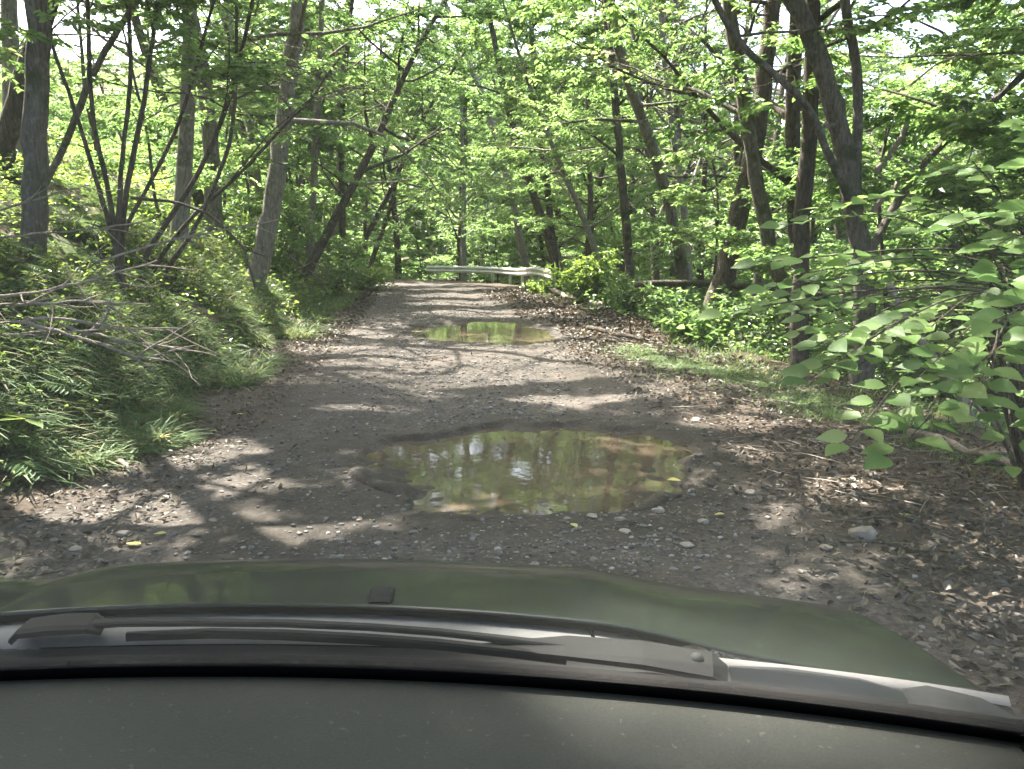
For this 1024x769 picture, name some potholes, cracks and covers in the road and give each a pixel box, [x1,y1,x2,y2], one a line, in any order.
pothole [340,418,720,522]
pothole [398,318,565,346]
